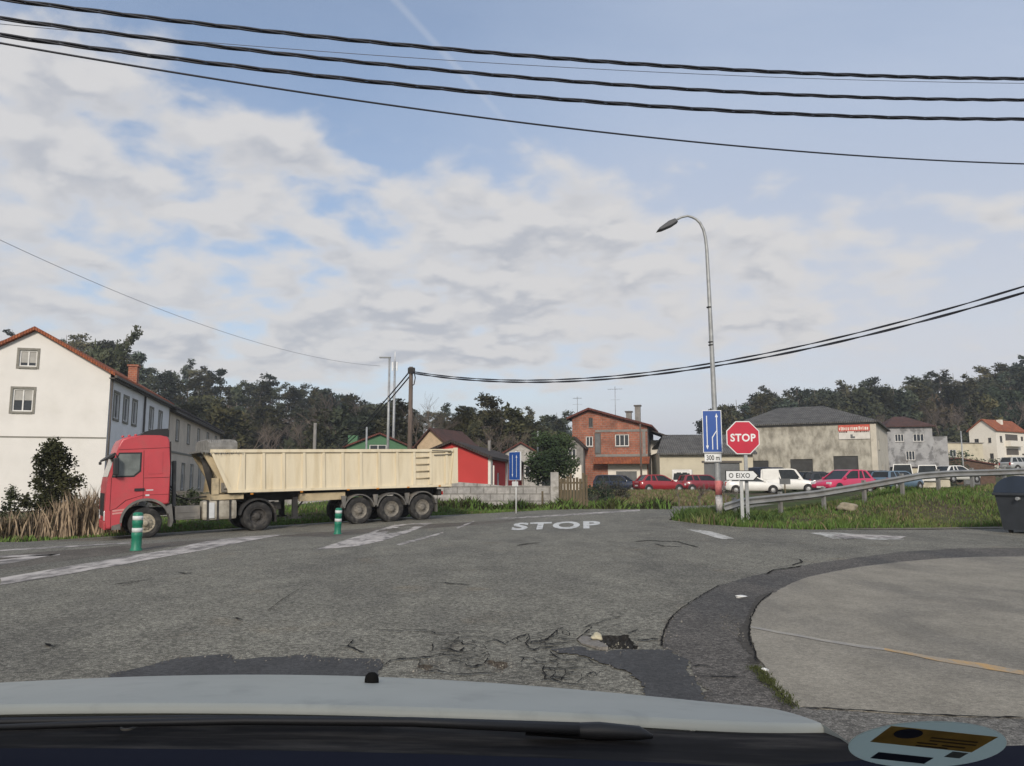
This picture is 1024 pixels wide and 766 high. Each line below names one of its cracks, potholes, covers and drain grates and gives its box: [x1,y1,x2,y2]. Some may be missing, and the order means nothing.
crack [347,616,658,686]
pothole [586,634,638,649]
